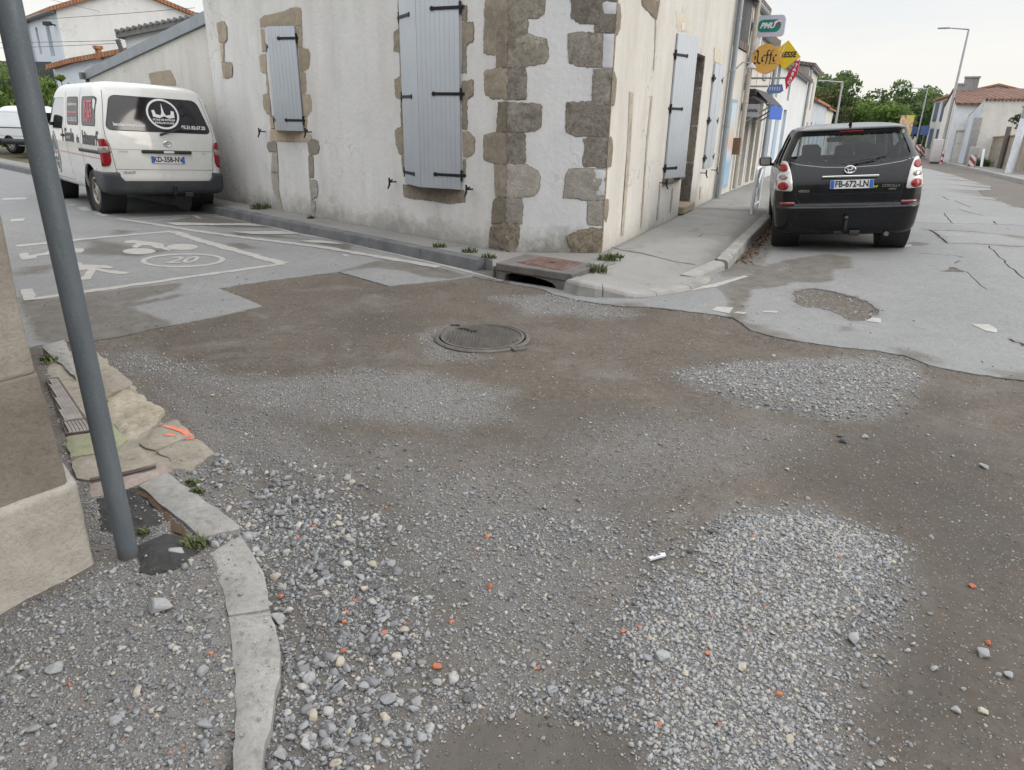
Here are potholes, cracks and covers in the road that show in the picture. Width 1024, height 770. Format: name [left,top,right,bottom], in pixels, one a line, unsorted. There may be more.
manhole cover [434,323,531,354]
drain grate [496,254,598,290]
pothole [793,289,879,321]
